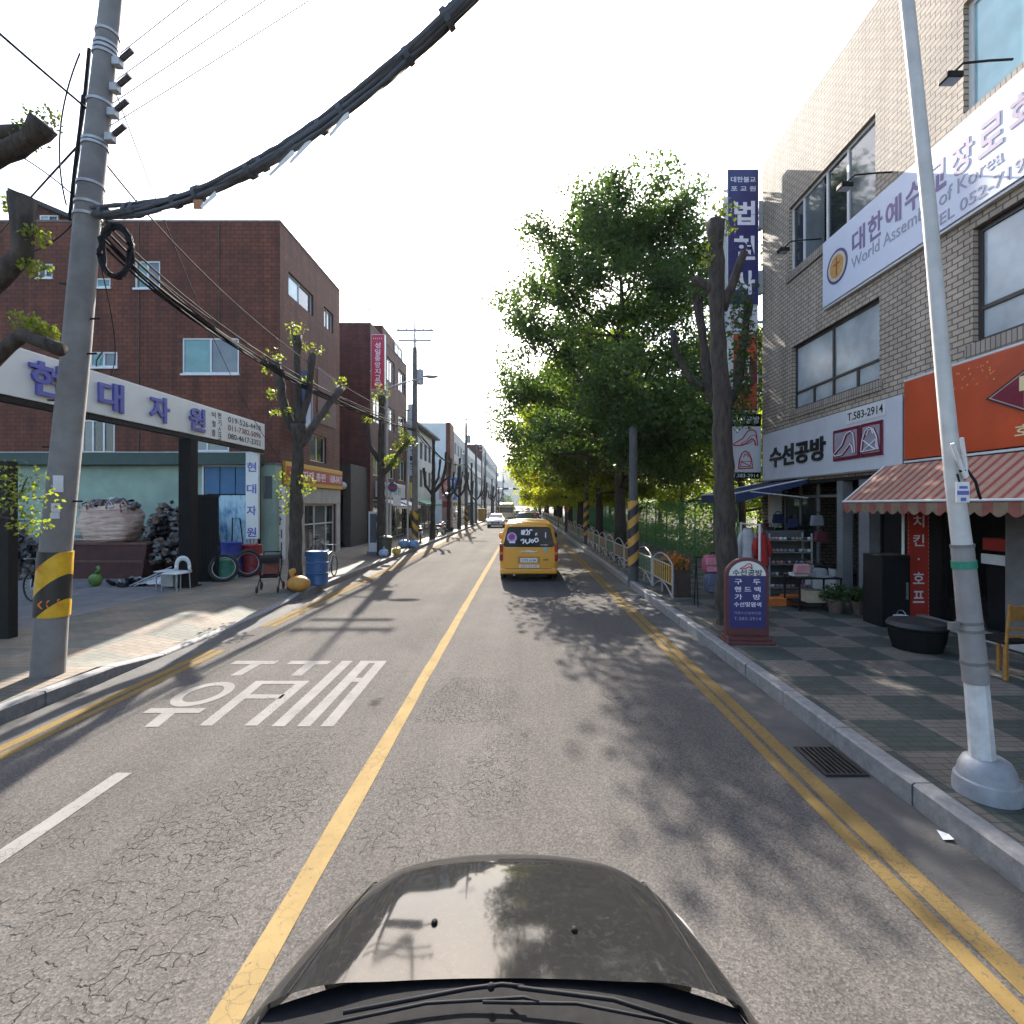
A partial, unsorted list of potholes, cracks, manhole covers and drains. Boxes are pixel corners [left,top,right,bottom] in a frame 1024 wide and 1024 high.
crack [457,728,527,827]
crack [102,760,332,870]
crack [0,809,109,850]
crack [0,870,241,1024]
crack [222,729,365,759]
crack [353,758,457,861]
drain grate [794,746,870,776]
